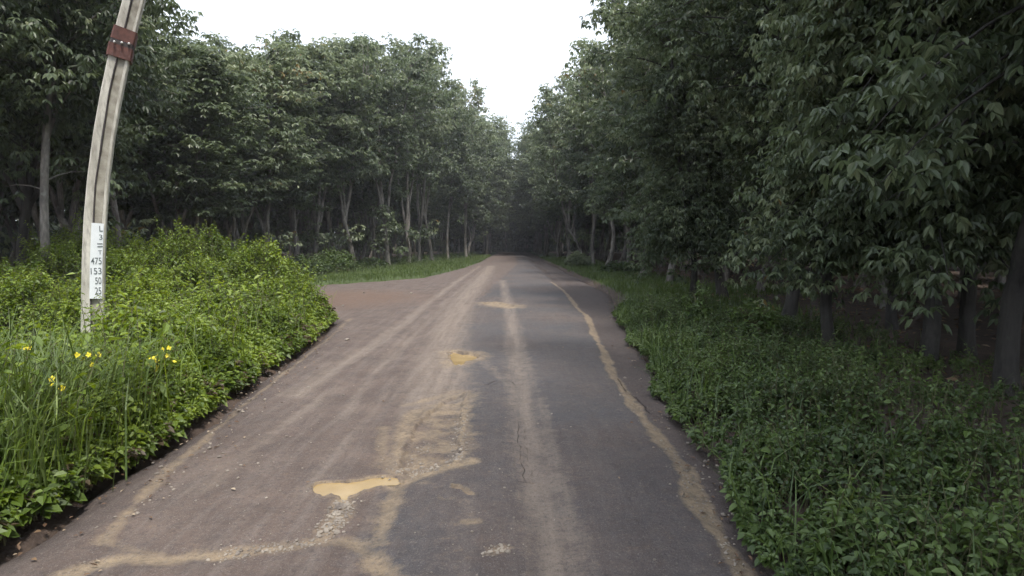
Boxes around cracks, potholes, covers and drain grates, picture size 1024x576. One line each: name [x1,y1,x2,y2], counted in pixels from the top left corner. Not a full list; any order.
crack [511,419,534,484]
pothole [306,474,404,503]
pothole [441,349,486,367]
pothole [474,301,528,309]
